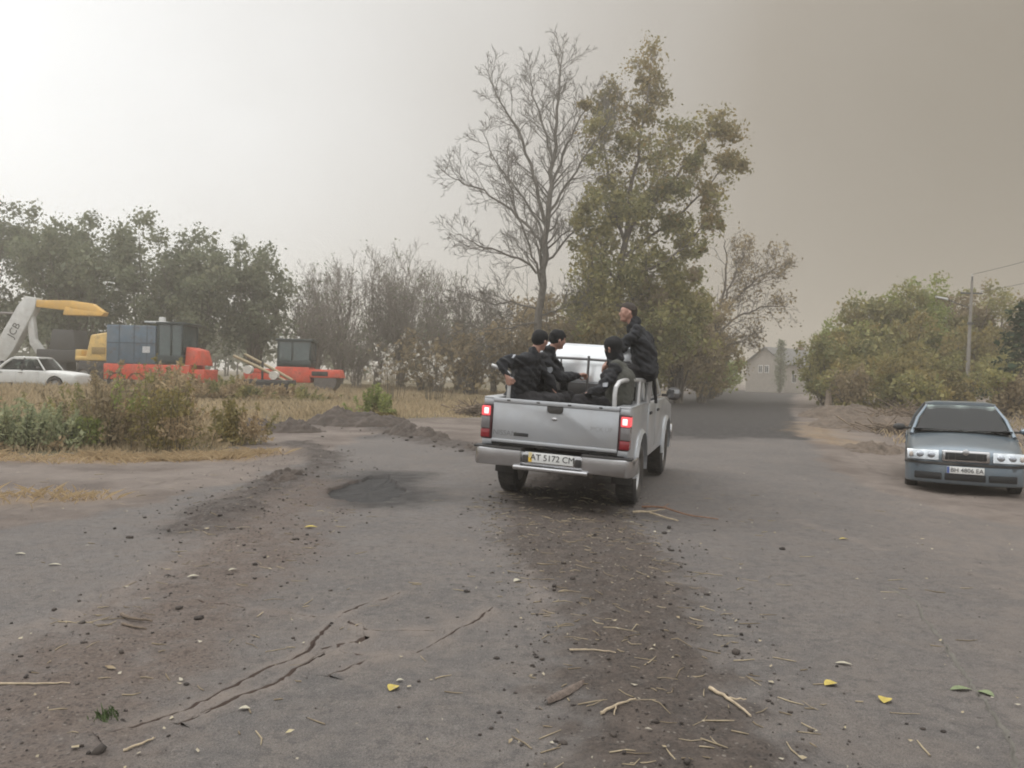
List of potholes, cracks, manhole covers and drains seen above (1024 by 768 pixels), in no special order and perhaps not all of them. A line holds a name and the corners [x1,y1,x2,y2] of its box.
crack [92,589,506,745]
pothole [311,473,417,507]
